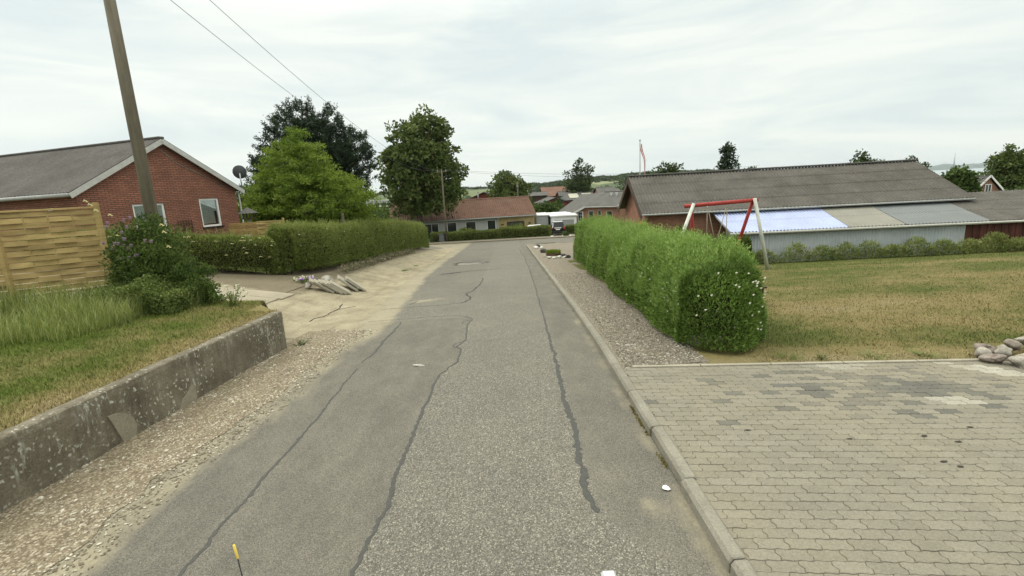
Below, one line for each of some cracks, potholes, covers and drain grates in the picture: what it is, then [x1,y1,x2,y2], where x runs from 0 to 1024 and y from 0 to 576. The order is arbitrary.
crack [393,268,500,309]
